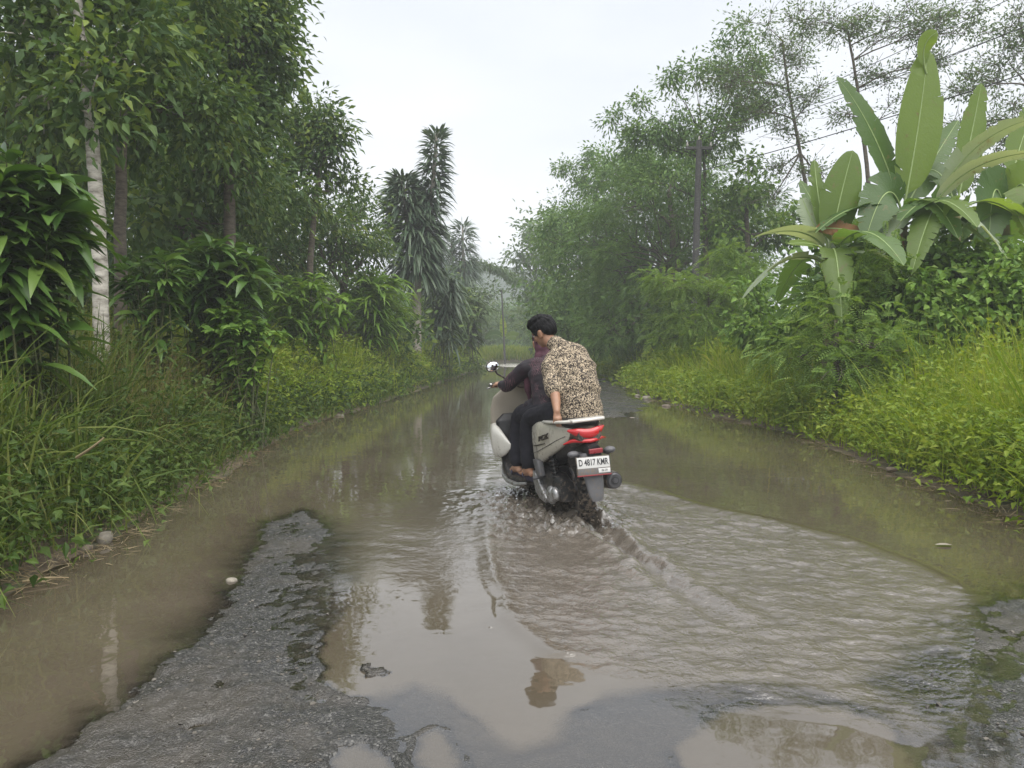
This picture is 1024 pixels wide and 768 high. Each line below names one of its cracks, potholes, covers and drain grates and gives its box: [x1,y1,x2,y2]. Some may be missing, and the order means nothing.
pothole [954,652,977,662]
pothole [314,734,405,768]
pothole [404,726,469,768]
pothole [313,589,642,757]
pothole [668,701,928,768]
